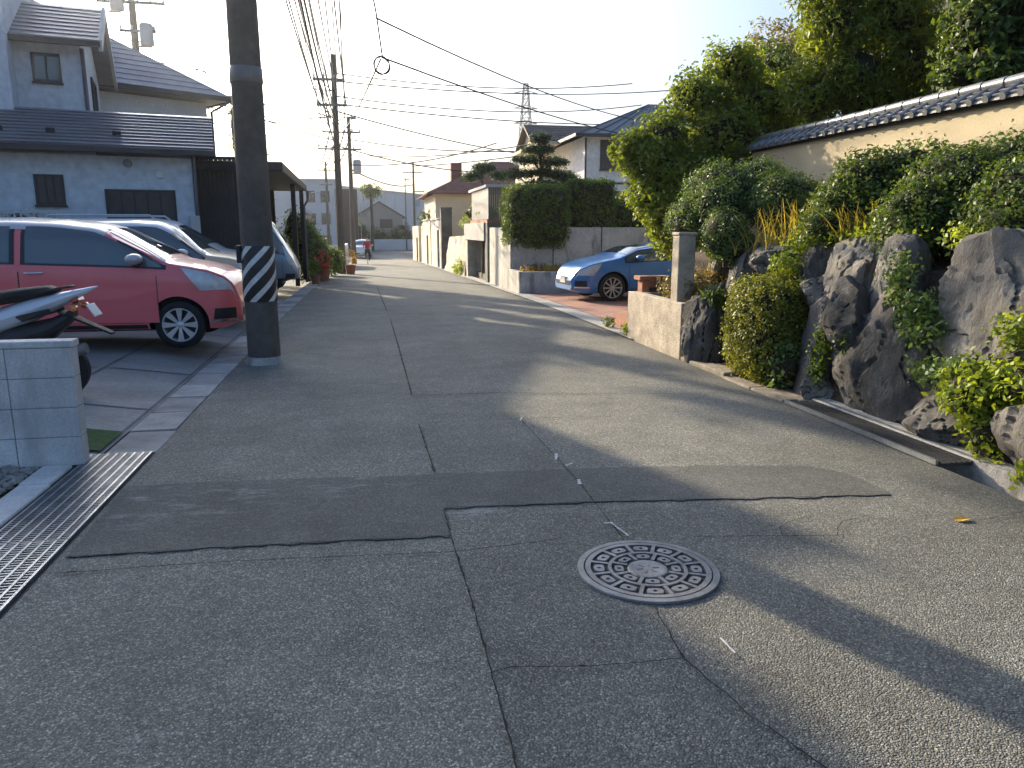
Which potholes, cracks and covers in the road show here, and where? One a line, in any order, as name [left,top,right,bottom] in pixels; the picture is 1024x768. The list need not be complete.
crack [52,507,827,768]
crack [693,516,865,537]
drain grate [784,398,977,467]
drain grate [0,539,69,617]
manhole cover [577,540,721,604]
